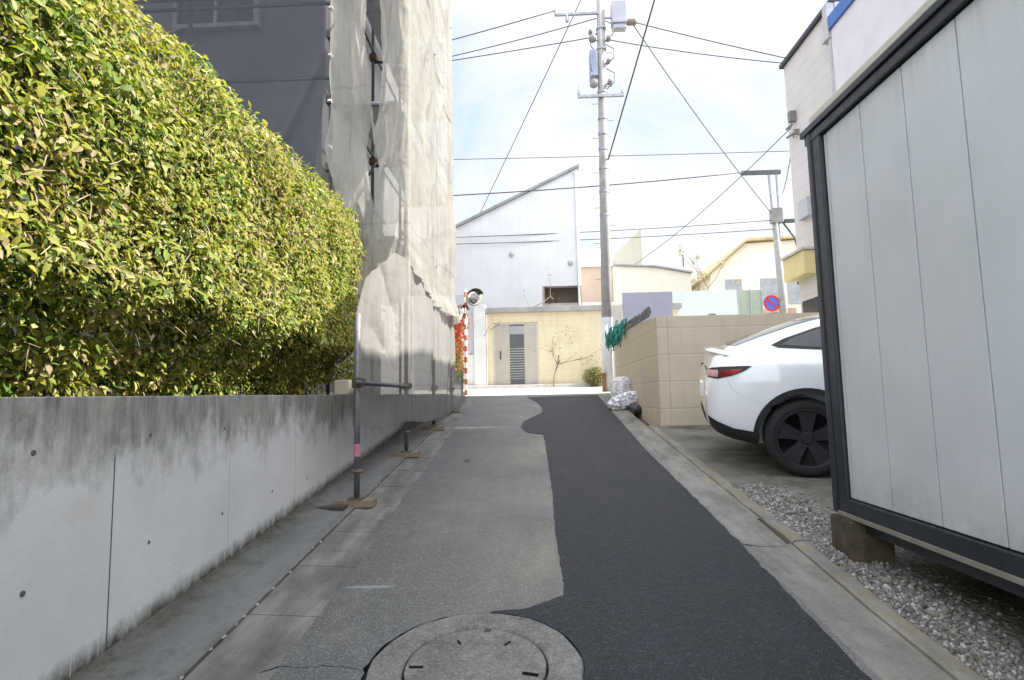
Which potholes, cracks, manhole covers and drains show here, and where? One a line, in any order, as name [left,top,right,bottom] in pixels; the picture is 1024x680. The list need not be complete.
manhole cover [363,613,585,680]
crack [259,665,364,674]
